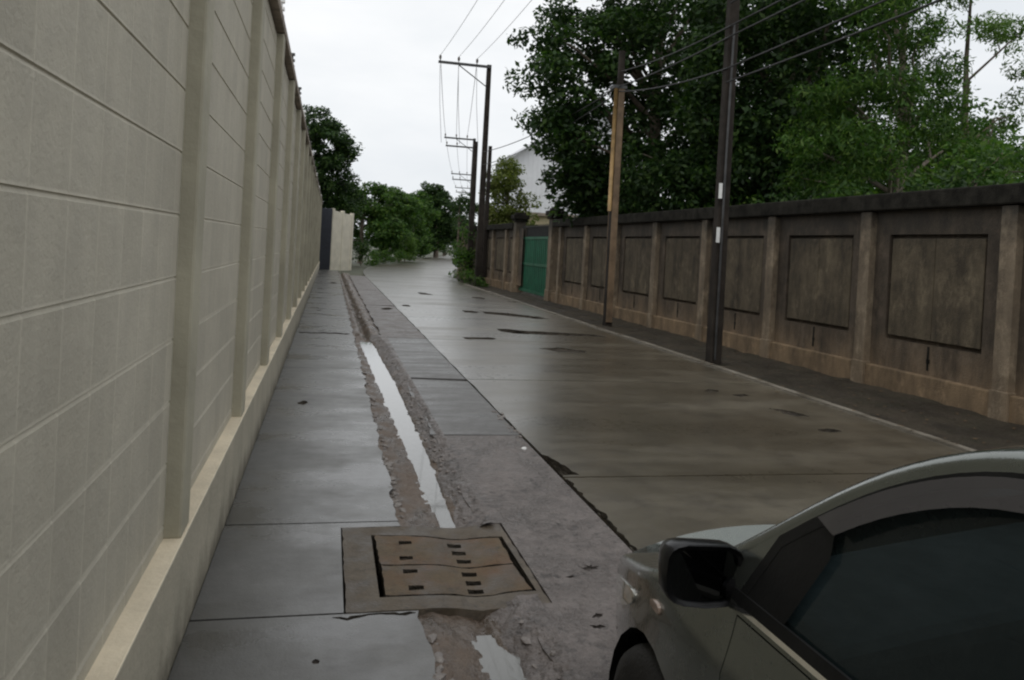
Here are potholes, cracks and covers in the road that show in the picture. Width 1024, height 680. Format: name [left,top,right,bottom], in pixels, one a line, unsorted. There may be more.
crack [565,479,637,551]
pothole [498,329,605,337]
pothole [483,311,547,319]
